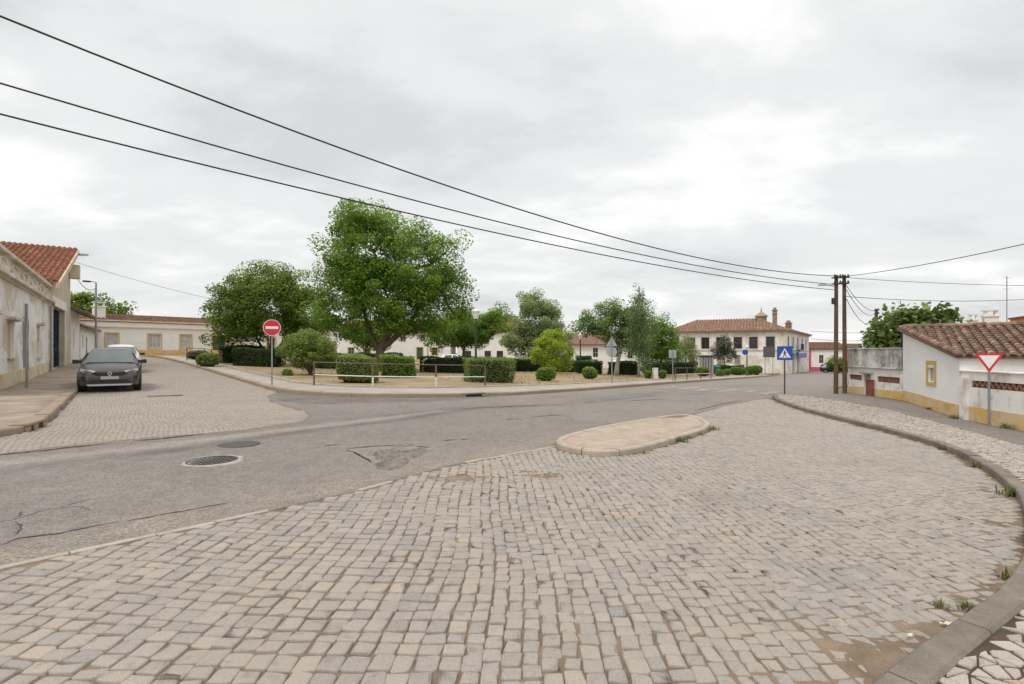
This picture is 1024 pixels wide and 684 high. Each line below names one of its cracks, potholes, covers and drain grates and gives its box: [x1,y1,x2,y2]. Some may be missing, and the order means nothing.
crack [1,499,229,545]
manhole cover [181,455,244,467]
